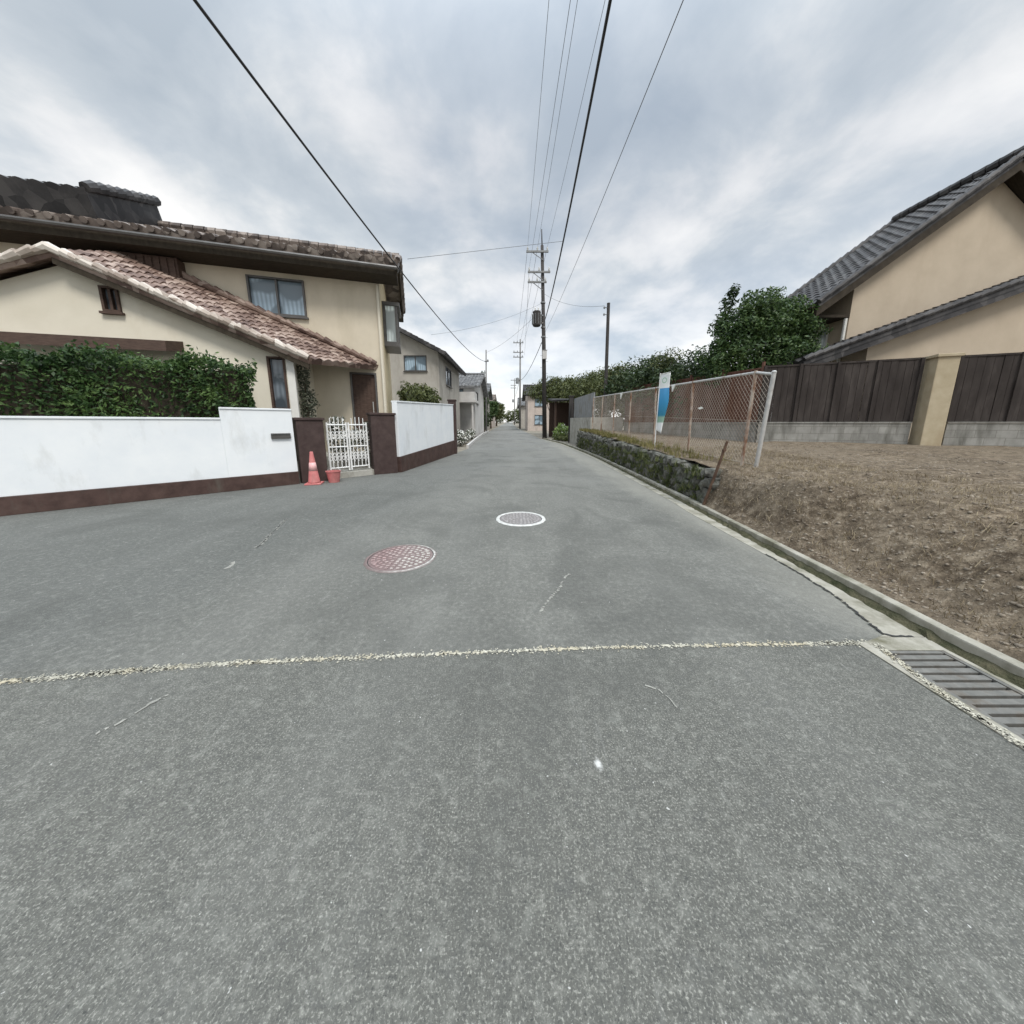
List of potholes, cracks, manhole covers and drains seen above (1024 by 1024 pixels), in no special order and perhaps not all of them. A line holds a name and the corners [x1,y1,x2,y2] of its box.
crack [96,694,169,734]
crack [540,573,569,612]
manhole cover [496,512,545,526]
manhole cover [363,545,437,573]
crack [256,518,287,547]
drain grate [880,650,1024,739]
